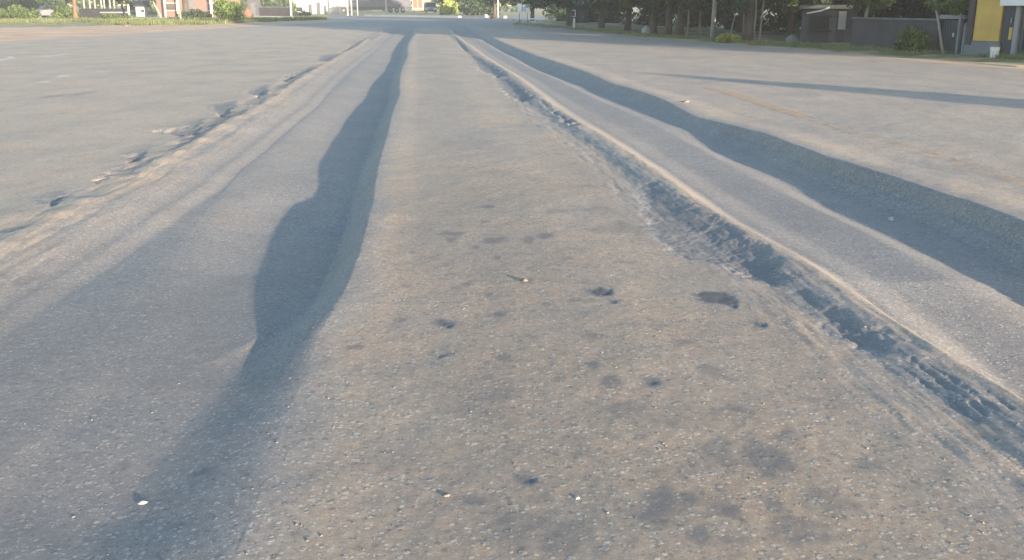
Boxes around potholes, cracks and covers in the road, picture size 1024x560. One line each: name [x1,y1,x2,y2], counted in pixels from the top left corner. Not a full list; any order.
pothole [434,318,455,328]
pothole [788,287,897,357]
pothole [586,287,613,296]
pothole [242,84,270,98]
pothole [689,291,739,309]
pothole [32,190,72,206]
pothole [122,148,151,163]
pothole [207,100,237,117]
